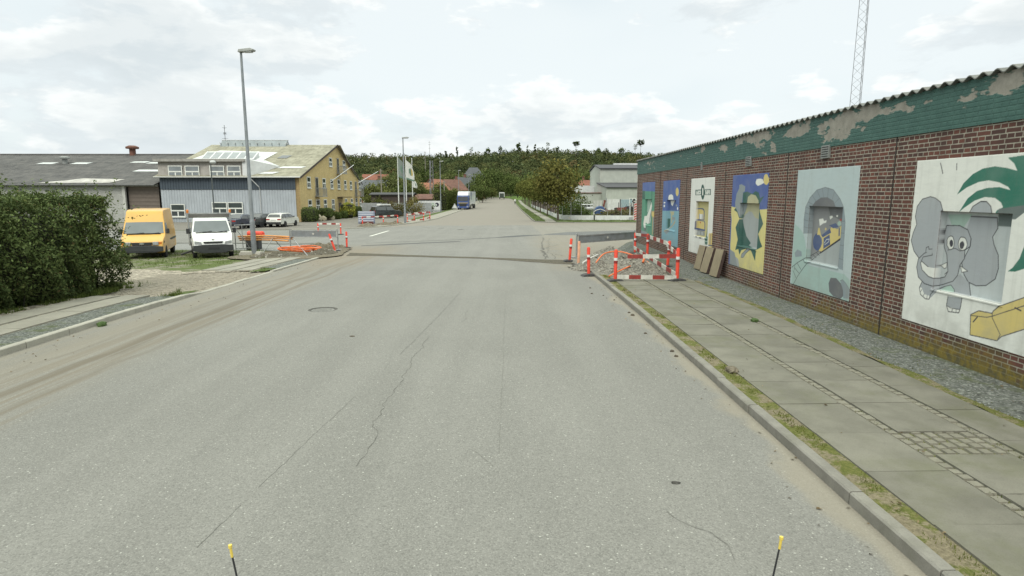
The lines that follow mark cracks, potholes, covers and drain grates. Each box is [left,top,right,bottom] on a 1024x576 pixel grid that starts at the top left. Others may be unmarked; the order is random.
crack [666,510,735,561]
crack [197,292,468,547]
